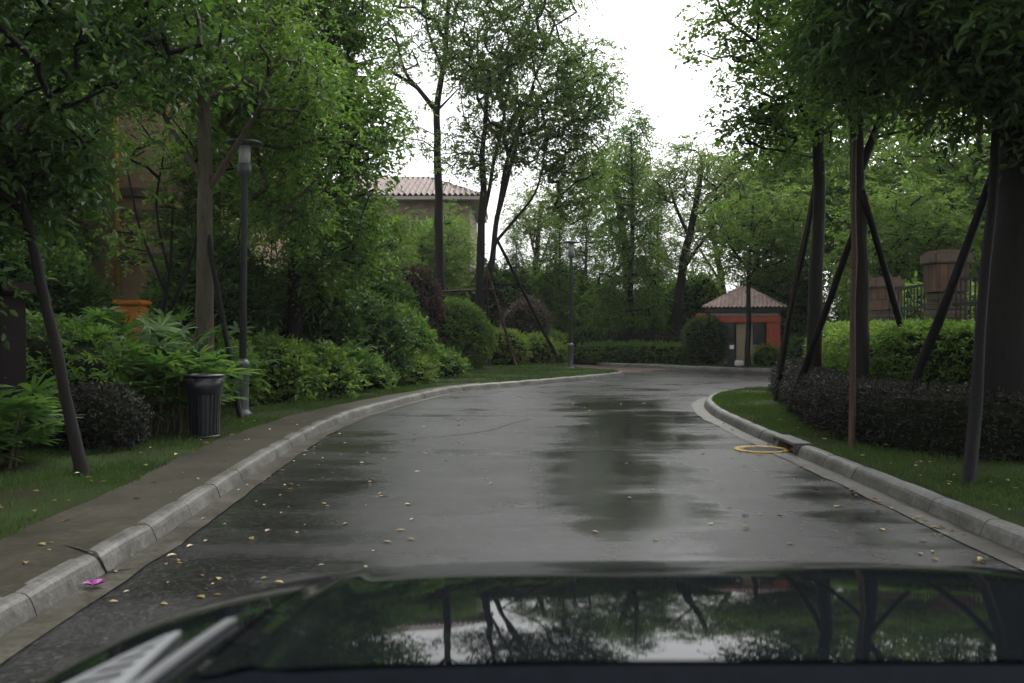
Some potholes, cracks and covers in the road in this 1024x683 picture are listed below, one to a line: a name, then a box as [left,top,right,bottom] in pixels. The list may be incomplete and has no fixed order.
manhole cover [734,445,790,454]
crack [66,545,131,571]
drain grate [772,435,812,455]
